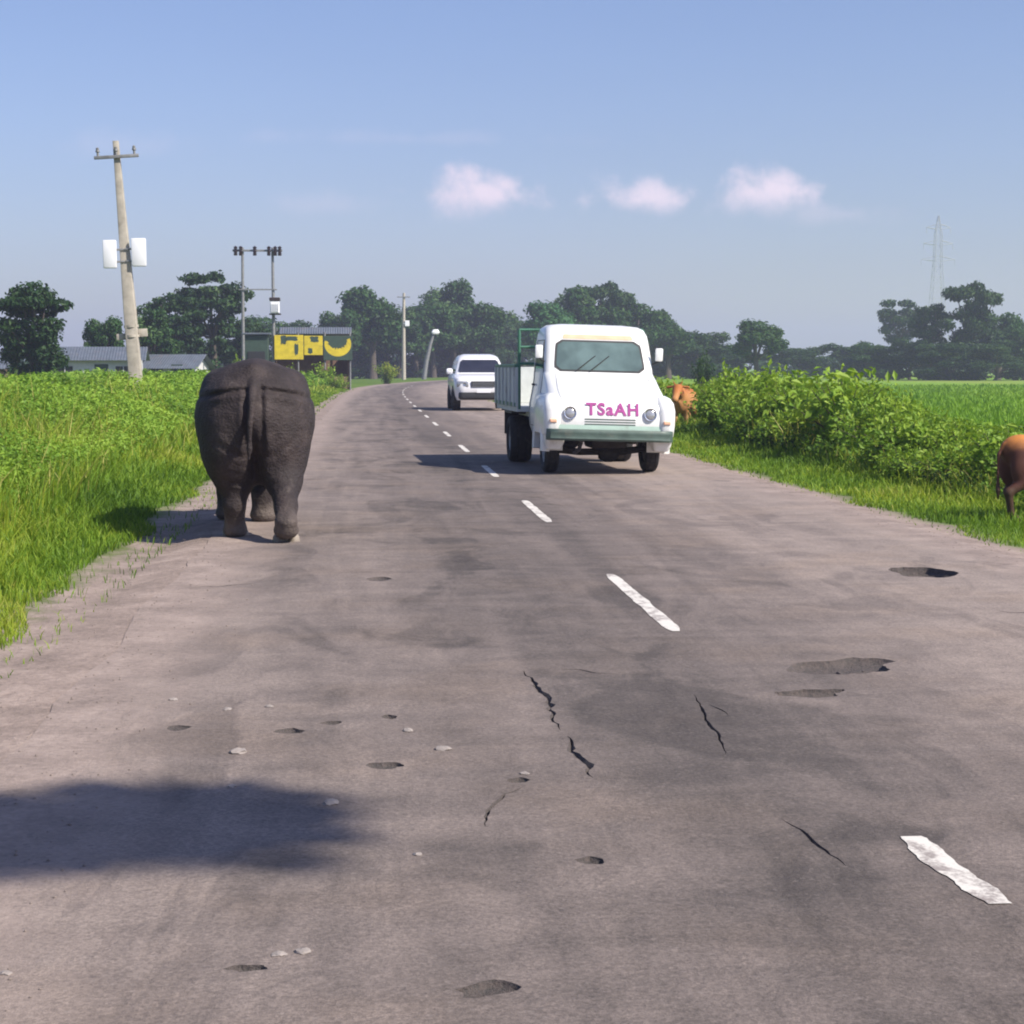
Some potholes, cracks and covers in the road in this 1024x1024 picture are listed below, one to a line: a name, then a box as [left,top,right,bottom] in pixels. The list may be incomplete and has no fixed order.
pothole [455,979,521,998]
crack [694,695,728,754]
crack [524,669,610,777]
pothole [786,657,896,674]
crack [782,819,846,866]
pothole [888,567,958,578]
pothole [575,856,604,864]
crack [484,787,522,827]
pothole [775,689,844,698]
